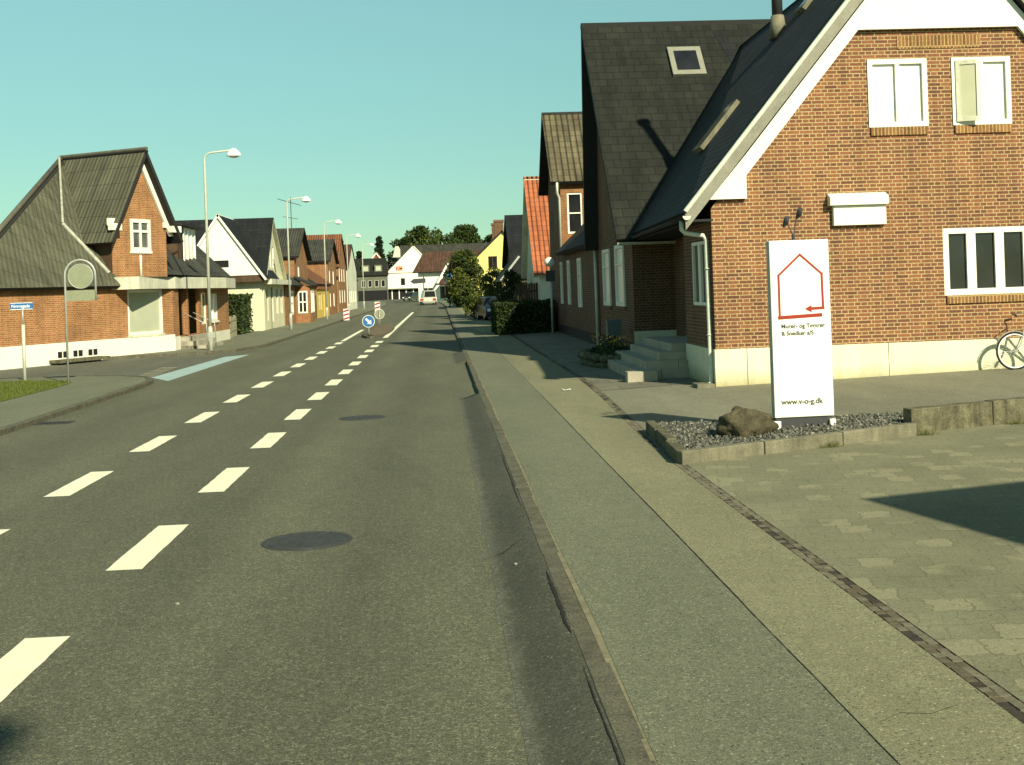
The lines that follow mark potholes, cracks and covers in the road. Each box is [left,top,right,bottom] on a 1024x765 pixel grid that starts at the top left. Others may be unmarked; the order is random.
manhole cover [261,531,352,551]
